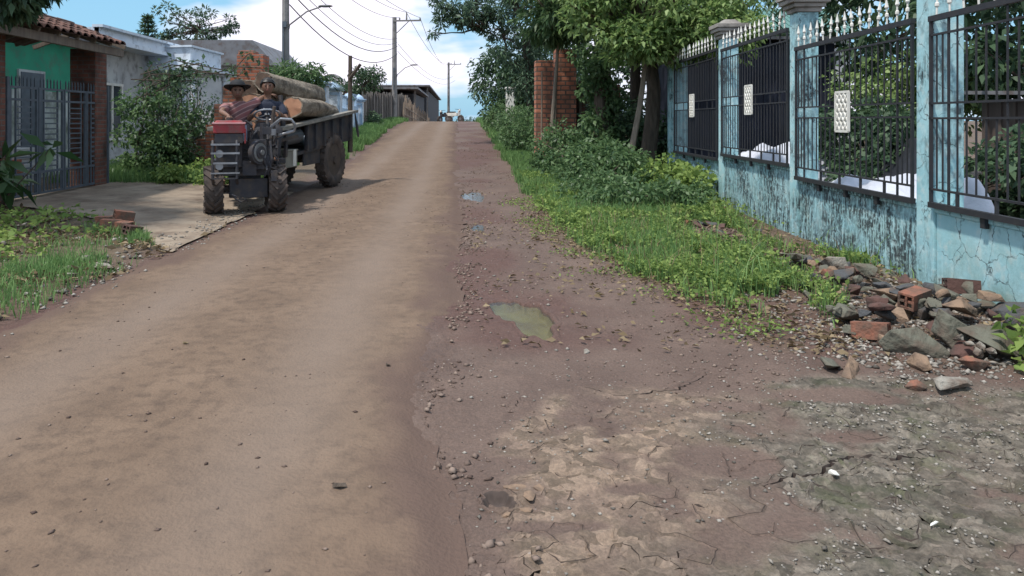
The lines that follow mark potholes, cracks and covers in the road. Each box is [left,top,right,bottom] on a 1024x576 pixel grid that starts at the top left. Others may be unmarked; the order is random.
pothole [482,297,562,345]
crack [447,370,1024,576]
pothole [477,488,524,514]
pothole [458,190,487,204]
